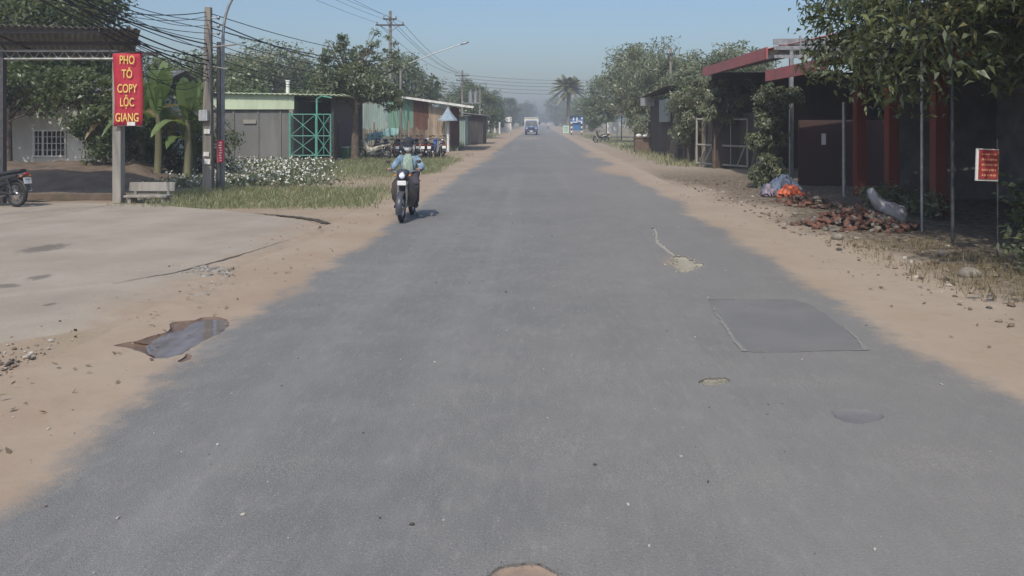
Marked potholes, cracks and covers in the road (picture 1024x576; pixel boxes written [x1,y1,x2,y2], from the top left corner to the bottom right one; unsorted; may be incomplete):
pothole [113,316,230,359]
crack [116,242,279,296]
crack [259,213,329,224]
crack [651,228,676,256]
pothole [482,561,563,576]
pothole [698,376,731,387]
pothole [658,255,706,273]
